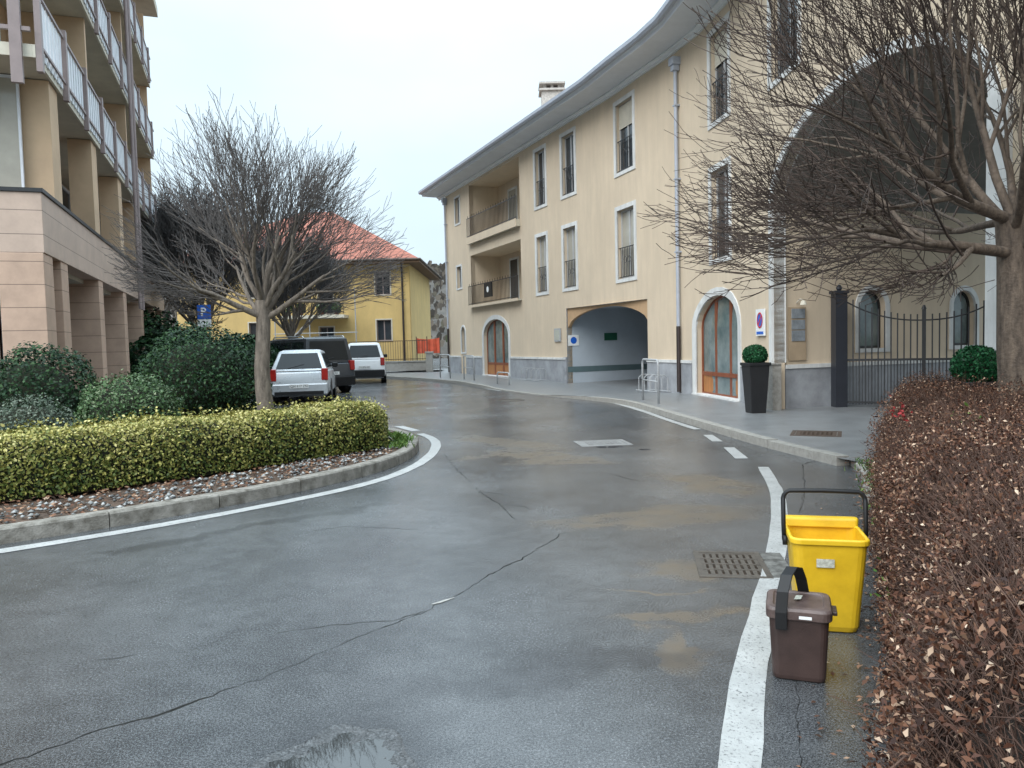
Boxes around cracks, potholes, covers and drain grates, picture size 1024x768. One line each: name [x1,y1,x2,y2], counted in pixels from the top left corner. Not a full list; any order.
pothole [248,724,419,768]
manhole cover [573,439,633,448]
drain grate [692,551,789,579]
